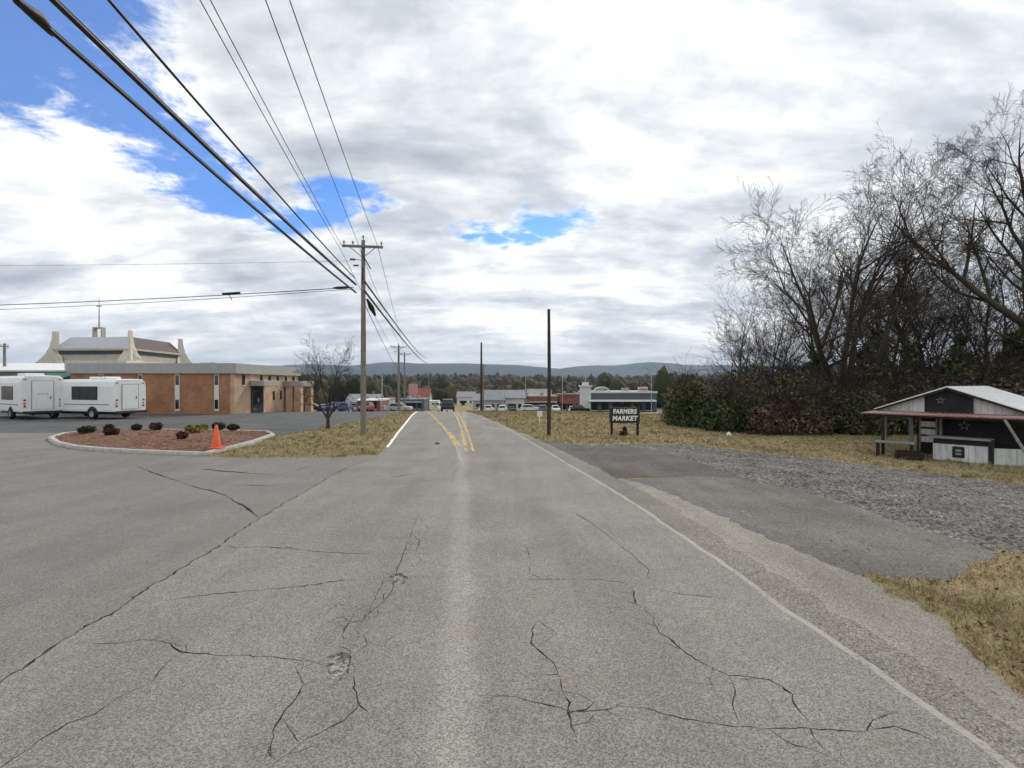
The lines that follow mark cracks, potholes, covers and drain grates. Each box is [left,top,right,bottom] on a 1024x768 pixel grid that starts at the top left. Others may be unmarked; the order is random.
pothole [325,652,352,683]
crack [137,466,311,517]
crack [0,514,429,768]
crack [479,514,937,768]
pothole [388,572,408,587]
